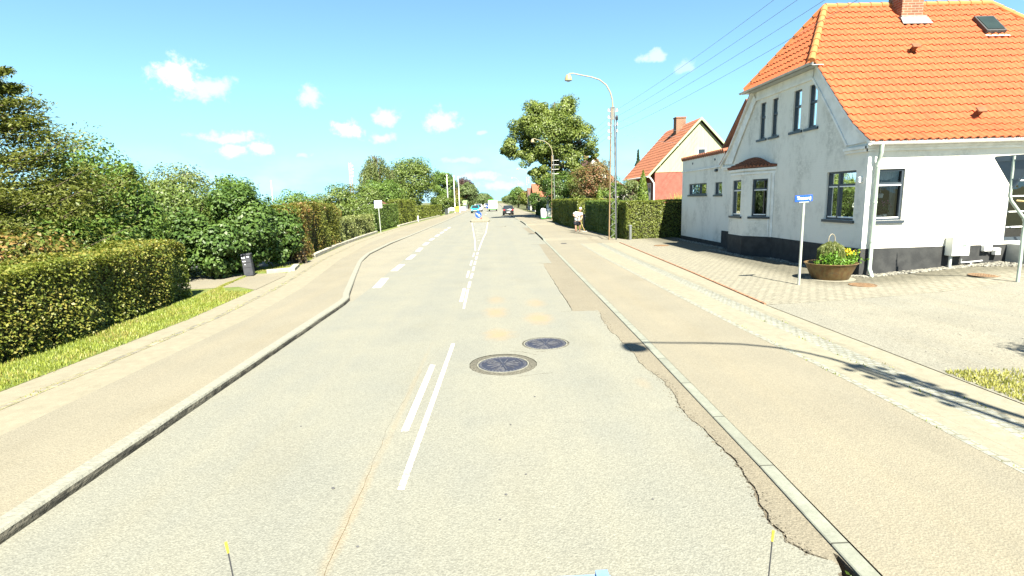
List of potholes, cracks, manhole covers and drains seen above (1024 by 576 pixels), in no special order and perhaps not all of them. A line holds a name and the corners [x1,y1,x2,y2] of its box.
manhole cover [522,338,569,350]
manhole cover [470,354,537,376]
